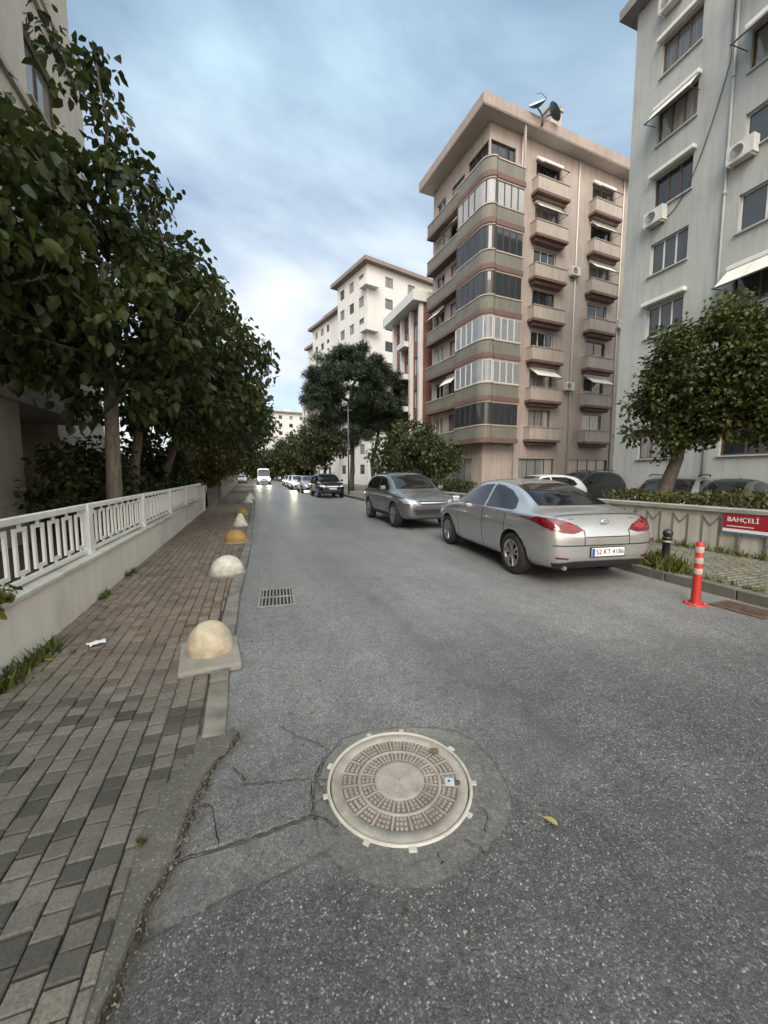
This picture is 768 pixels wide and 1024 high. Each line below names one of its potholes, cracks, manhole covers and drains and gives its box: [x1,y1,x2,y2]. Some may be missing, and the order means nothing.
manhole cover [323,729,477,853]
drain grate [257,587,296,609]
crack [96,724,344,1024]
drain grate [708,600,768,620]
